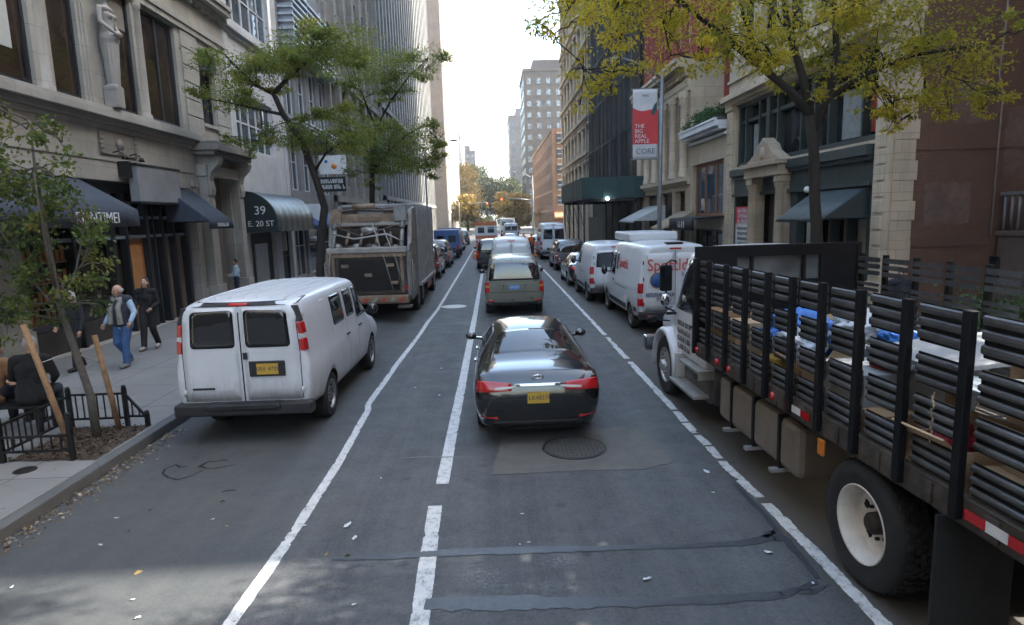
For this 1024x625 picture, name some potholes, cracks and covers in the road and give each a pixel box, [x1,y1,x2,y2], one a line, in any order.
manhole cover [12,466,38,475]
crack [162,459,233,480]
manhole cover [542,436,607,460]
